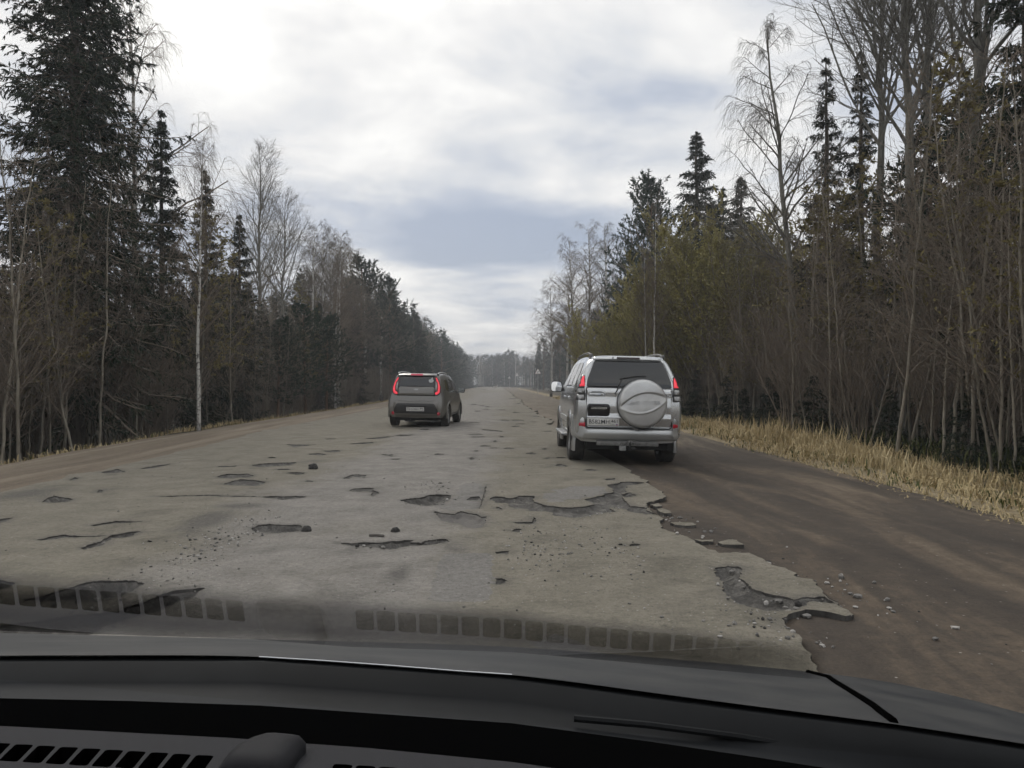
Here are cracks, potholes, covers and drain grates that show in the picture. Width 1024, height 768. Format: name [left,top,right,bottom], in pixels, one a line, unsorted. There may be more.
pothole [350,488,379,496]
pothole [490,482,653,518]
pothole [74,580,144,592]
pothole [714,566,834,611]
pothole [341,539,449,549]
pothole [0,588,205,635]
pothole [434,511,487,528]
pothole [401,494,451,506]
pothole [251,524,302,533]
